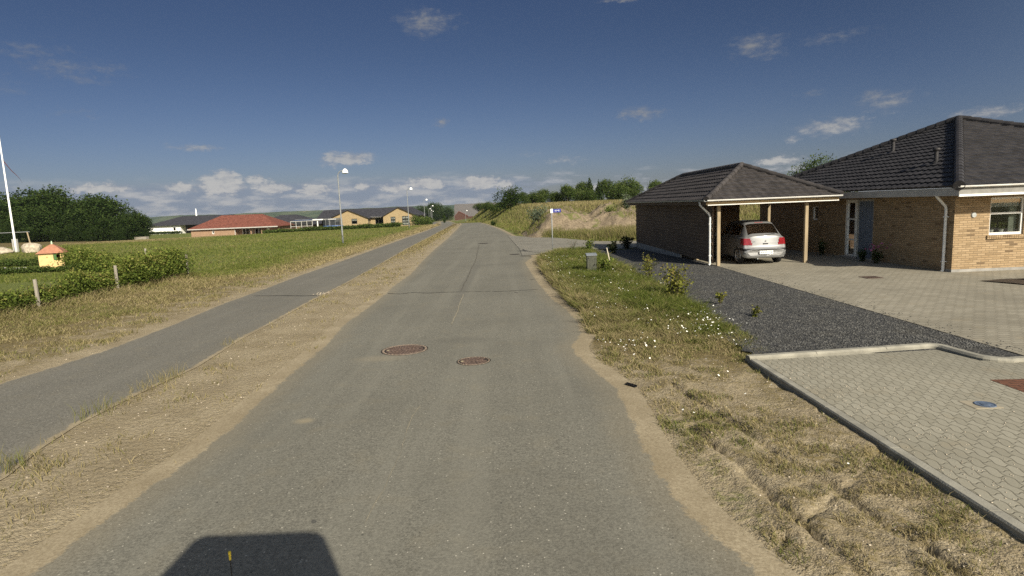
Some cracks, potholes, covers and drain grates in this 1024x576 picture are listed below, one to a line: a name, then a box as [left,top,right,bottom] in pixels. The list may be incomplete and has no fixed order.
crack [388,247,534,324]
utility cover [958,400,1004,409]
manhole cover [456,356,491,365]
manhole cover [381,344,428,356]
